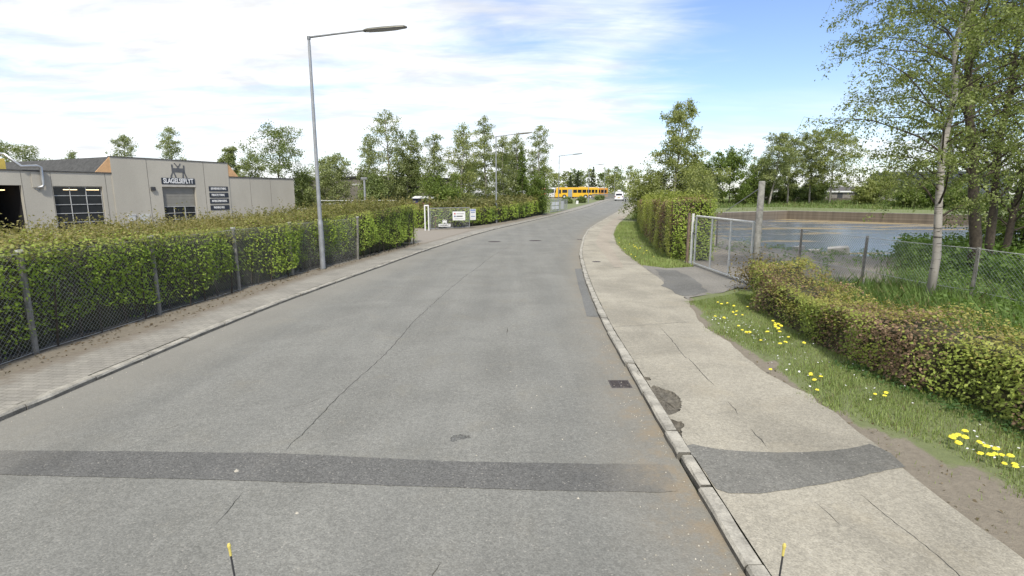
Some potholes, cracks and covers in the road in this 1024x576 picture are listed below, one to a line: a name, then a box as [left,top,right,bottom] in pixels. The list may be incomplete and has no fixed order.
drain grate [608,380,632,388]
crack [862,495,960,576]
crack [286,247,508,450]
